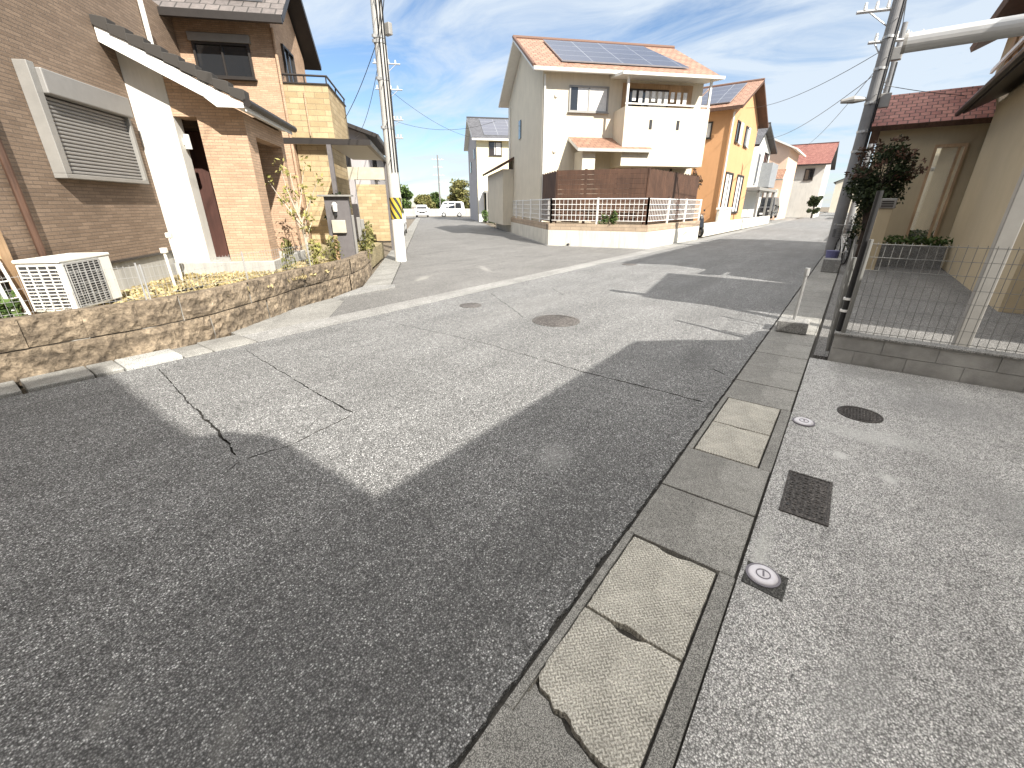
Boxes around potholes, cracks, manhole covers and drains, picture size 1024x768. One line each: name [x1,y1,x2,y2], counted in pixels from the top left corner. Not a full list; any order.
crack [159,352,352,473]
manhole cover [837,406,884,423]
manhole cover [778,470,833,527]
manhole cover [532,315,580,327]
